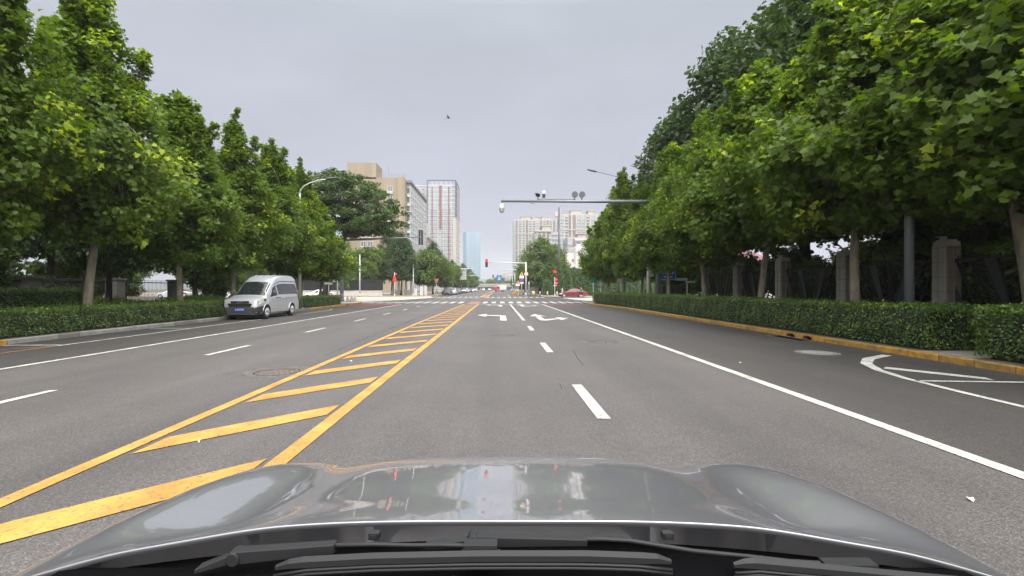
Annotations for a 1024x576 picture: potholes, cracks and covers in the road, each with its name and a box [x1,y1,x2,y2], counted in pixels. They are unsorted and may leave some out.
drain grate [767,331,822,341]
manhole cover [237,366,311,378]
